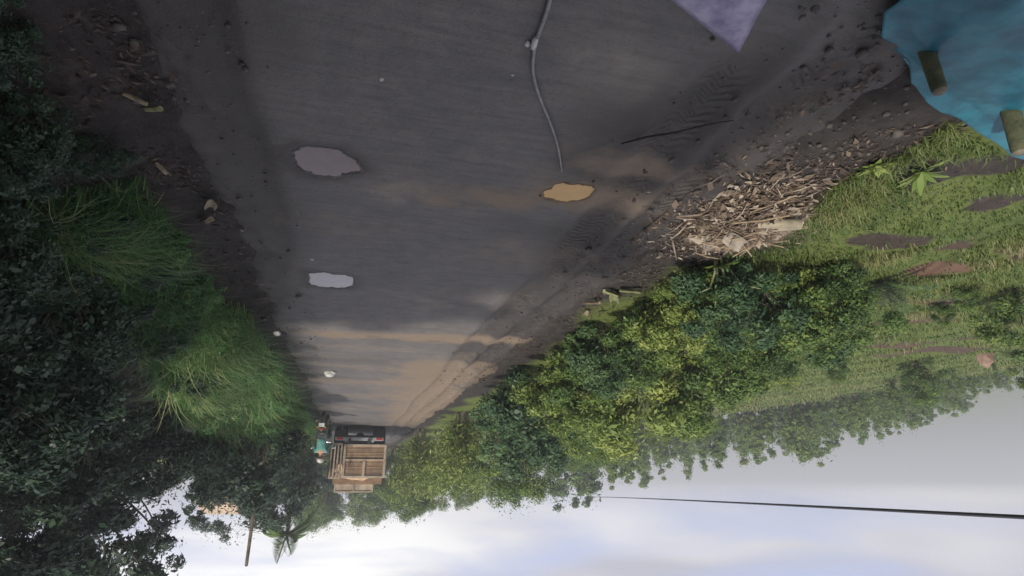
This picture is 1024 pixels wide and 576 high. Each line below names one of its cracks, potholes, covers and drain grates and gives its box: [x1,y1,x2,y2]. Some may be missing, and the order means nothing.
pothole [541,181,595,203]
